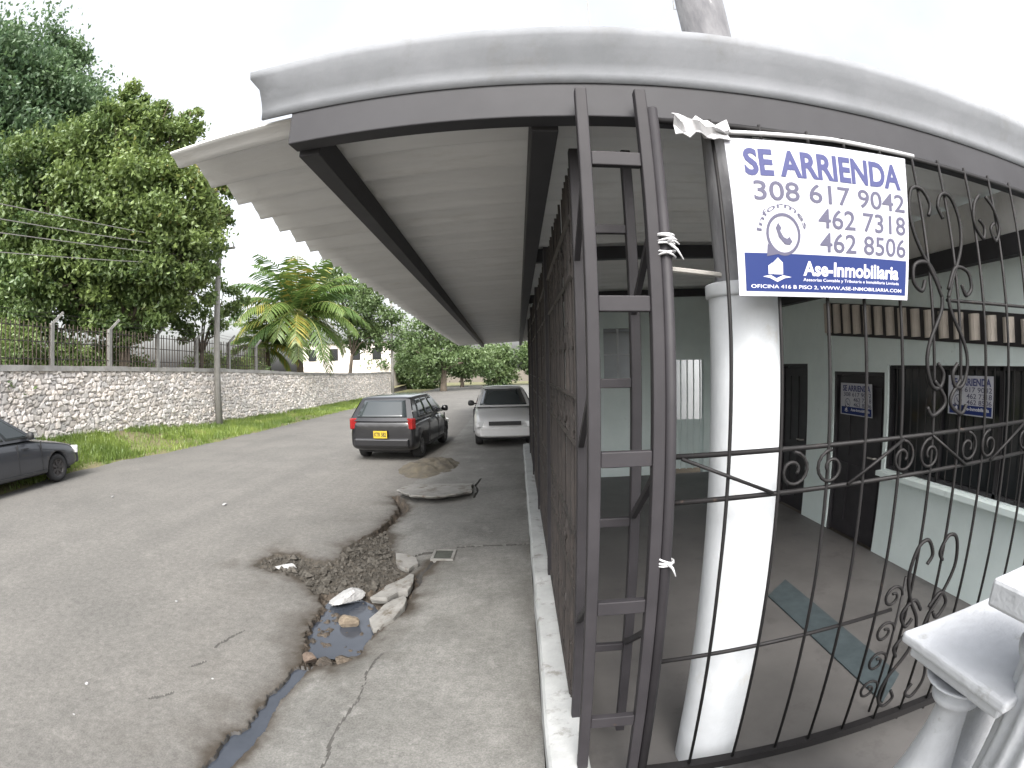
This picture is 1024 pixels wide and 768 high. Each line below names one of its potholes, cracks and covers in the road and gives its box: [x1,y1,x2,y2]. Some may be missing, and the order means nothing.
pothole [254,533,405,595]
crack [320,654,383,768]
pothole [299,578,419,671]
